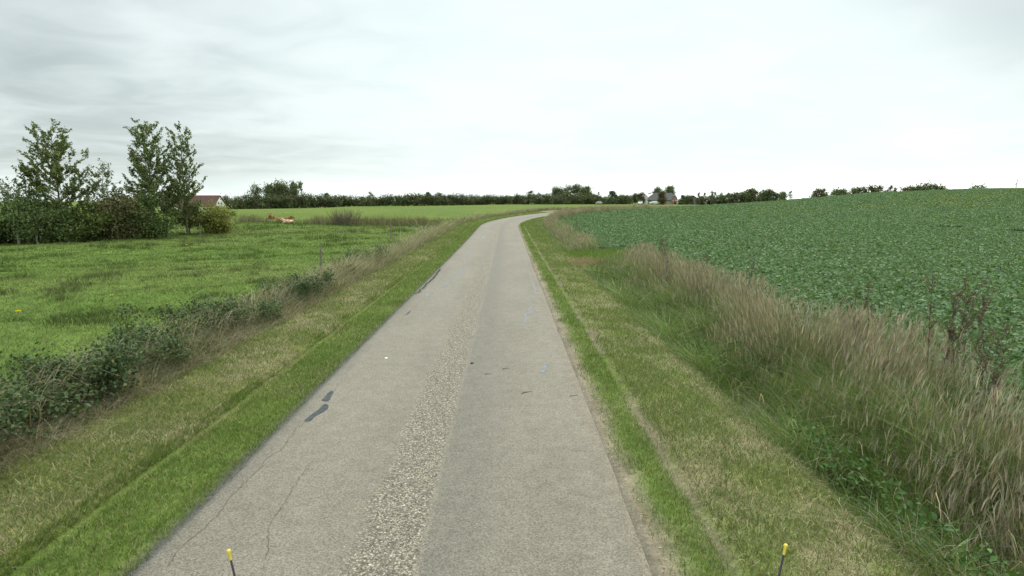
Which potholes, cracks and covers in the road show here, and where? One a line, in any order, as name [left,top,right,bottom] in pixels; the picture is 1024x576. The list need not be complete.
crack [167,383,340,567]
crack [414,269,441,294]
